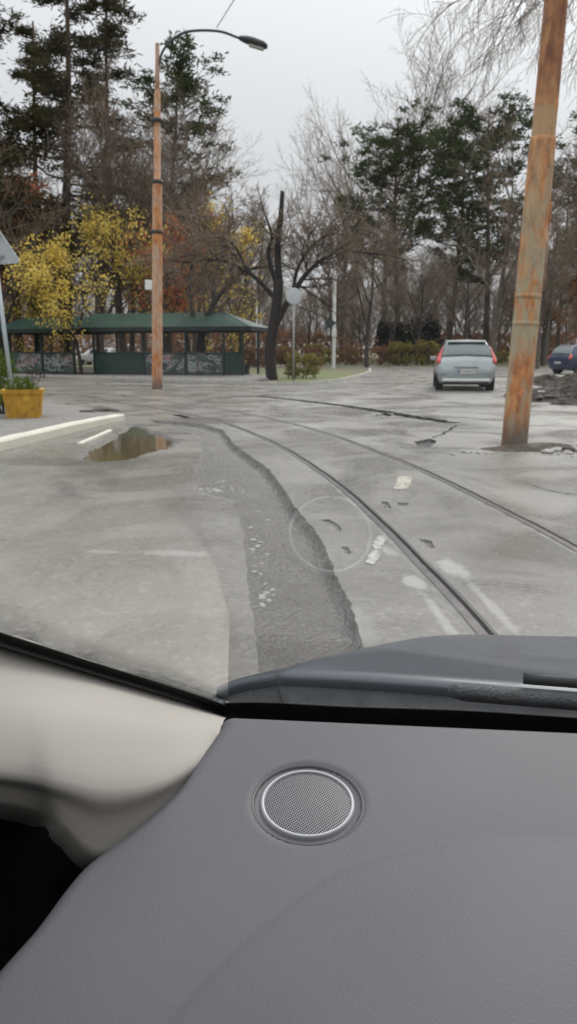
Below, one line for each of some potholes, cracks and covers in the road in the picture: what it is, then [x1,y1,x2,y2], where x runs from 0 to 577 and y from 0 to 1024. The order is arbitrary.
pothole [75,425,181,462]
